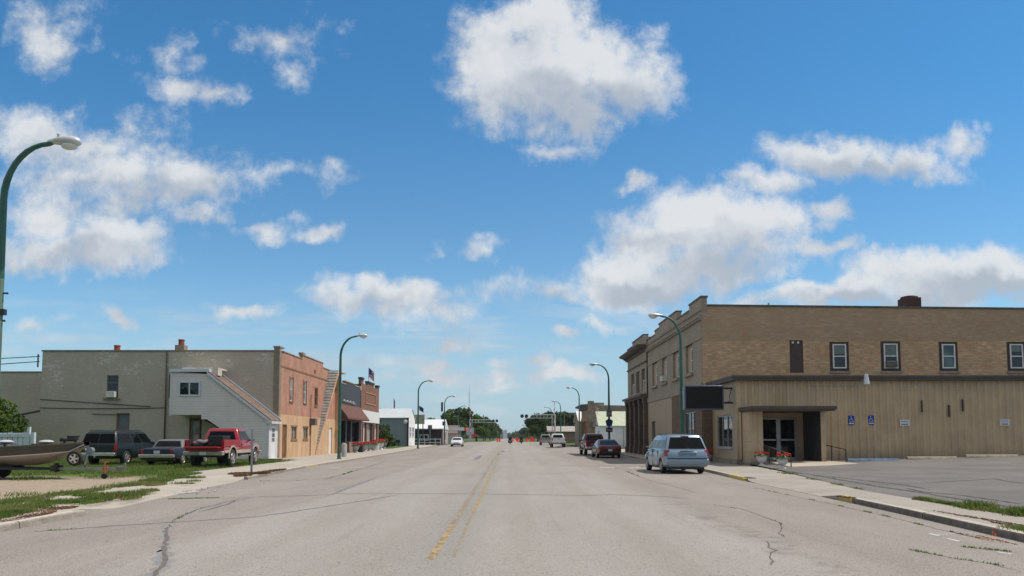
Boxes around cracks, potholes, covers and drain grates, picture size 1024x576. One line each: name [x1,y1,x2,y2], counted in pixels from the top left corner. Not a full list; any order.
crack [719,505,782,564]
crack [138,498,248,576]
